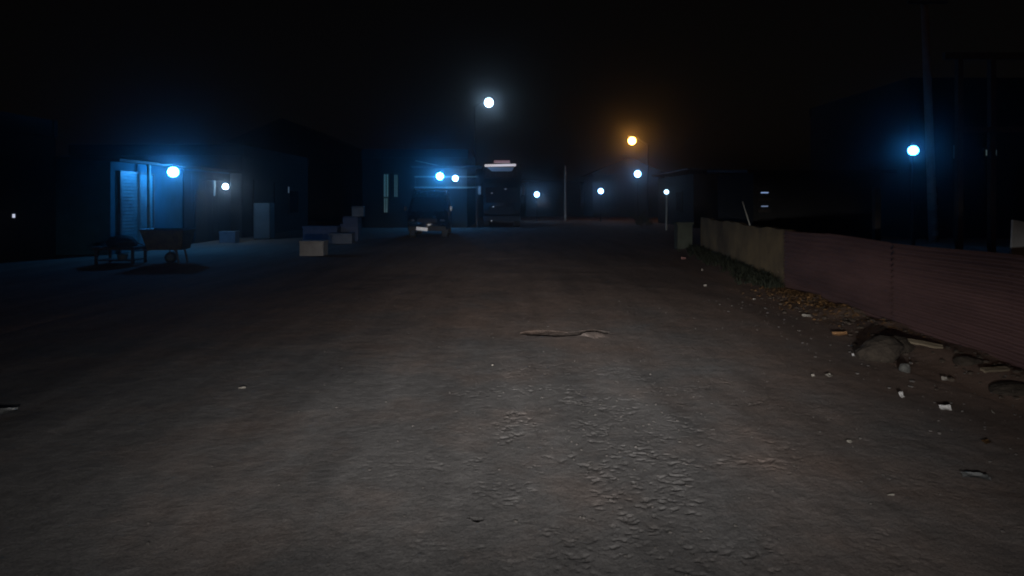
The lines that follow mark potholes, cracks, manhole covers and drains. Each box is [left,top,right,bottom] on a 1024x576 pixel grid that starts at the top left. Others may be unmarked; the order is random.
pothole [466,515,486,524]
pothole [518,329,611,339]
